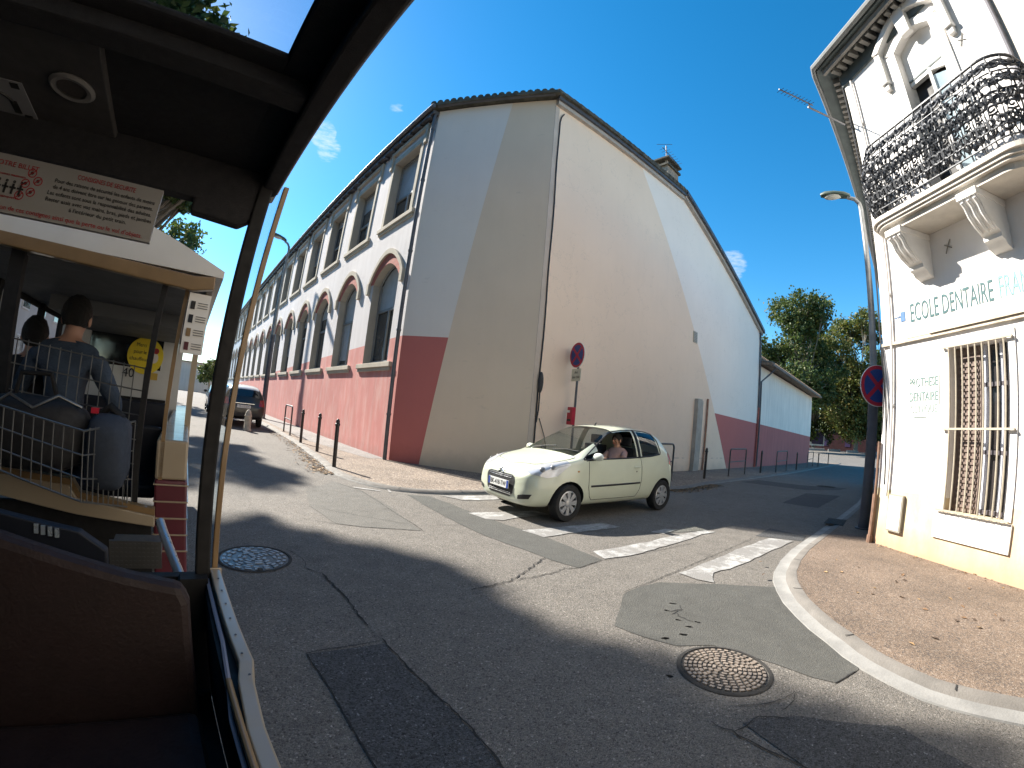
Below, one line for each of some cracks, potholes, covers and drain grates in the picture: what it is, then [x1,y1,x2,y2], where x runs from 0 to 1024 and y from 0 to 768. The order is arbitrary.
crack [472,558,578,590]
manhole cover [676,646,774,696]
manhole cover [218,545,292,572]
